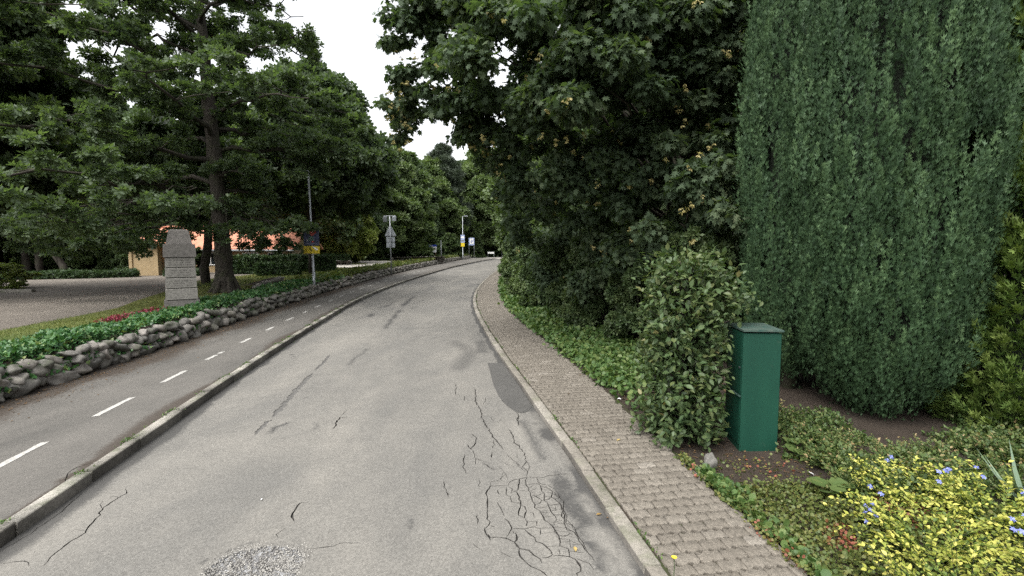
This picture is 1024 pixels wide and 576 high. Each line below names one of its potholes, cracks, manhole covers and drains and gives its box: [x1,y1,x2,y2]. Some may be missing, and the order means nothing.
crack [3,489,127,566]
crack [443,387,594,576]
